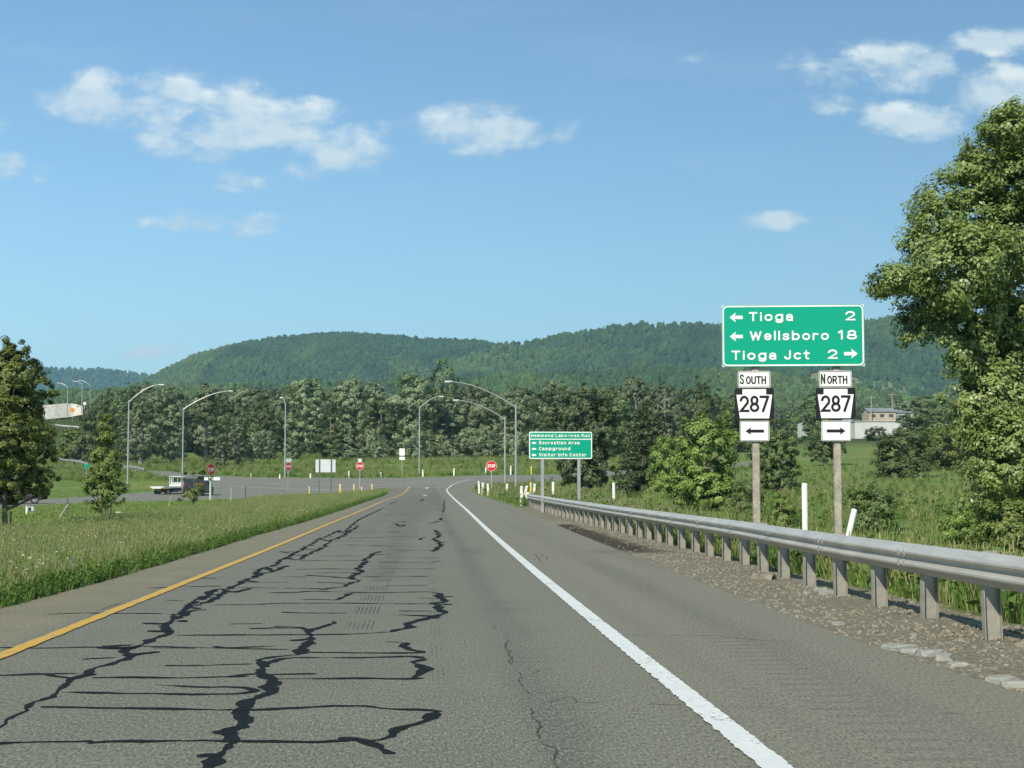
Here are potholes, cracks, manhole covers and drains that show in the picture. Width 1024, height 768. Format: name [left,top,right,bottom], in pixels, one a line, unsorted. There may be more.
crack [494,625,559,768]
